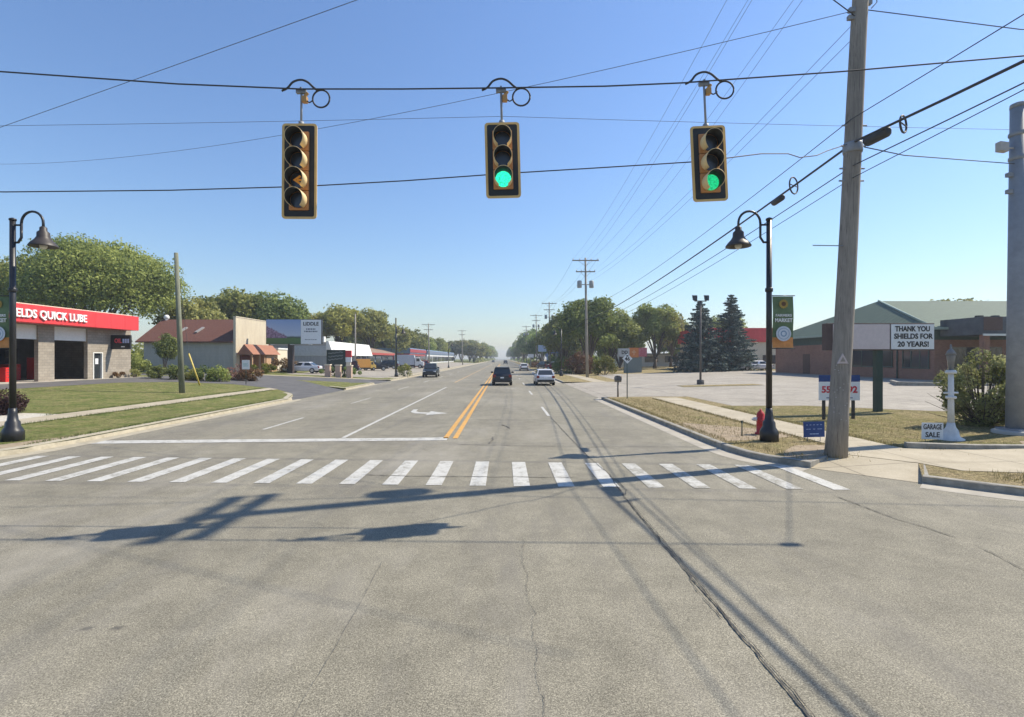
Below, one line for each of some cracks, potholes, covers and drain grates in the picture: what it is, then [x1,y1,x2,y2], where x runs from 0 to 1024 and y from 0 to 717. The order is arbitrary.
crack [522,541,545,717]
